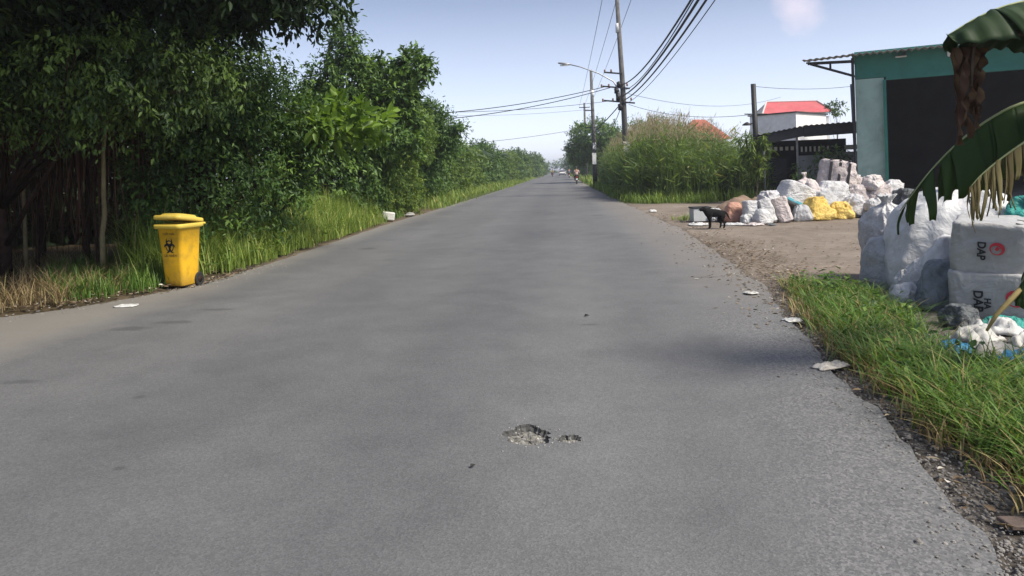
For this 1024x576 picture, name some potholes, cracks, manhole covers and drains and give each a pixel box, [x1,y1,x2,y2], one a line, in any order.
pothole [492,418,560,452]
pothole [554,435,585,444]
